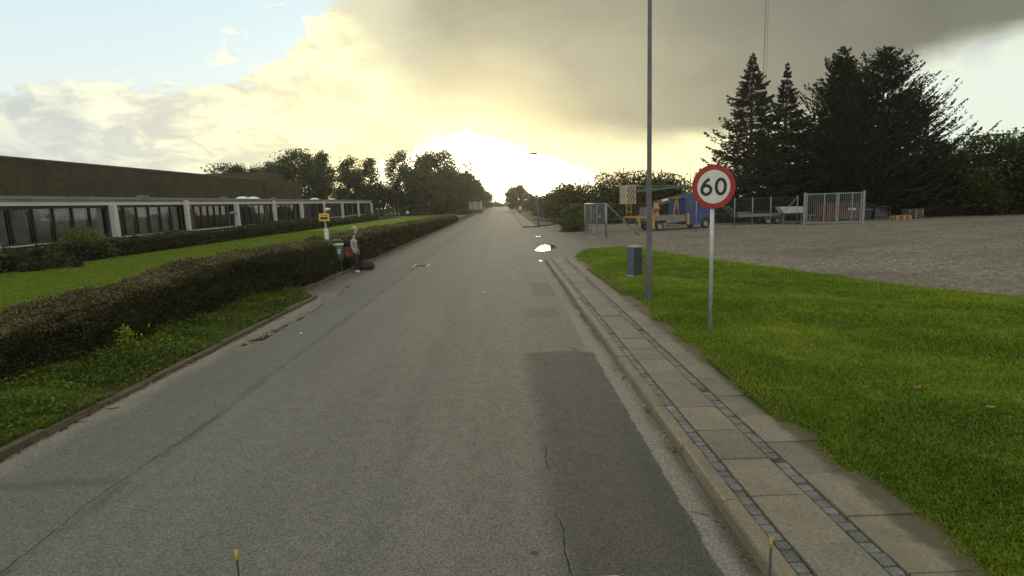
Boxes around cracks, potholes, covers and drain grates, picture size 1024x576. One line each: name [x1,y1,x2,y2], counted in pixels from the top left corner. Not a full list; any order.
crack [555,511,573,576]
